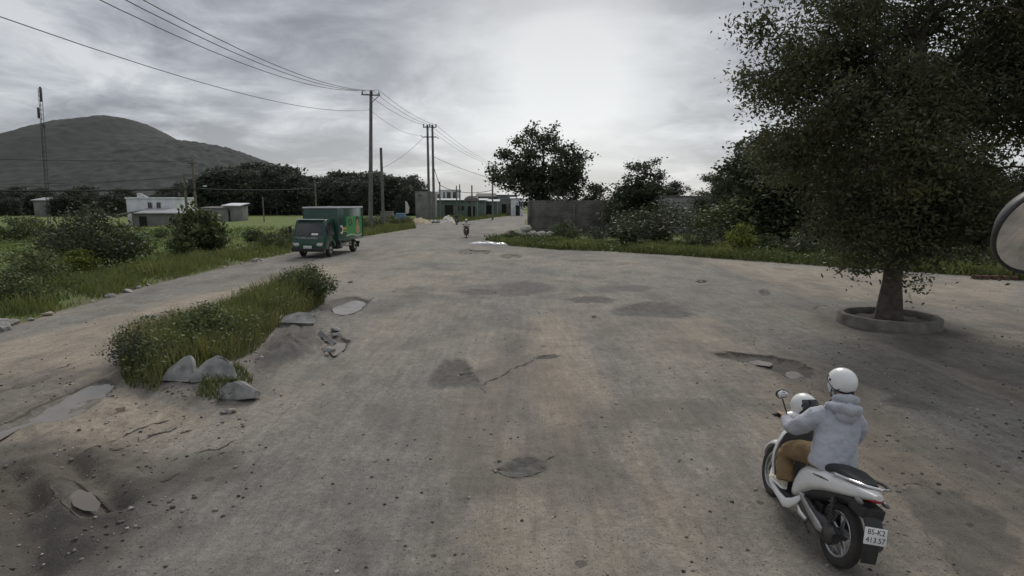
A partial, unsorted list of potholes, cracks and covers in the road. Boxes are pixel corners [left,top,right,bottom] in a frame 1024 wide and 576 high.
pothole [321,334,351,359]
crack [83,420,177,452]
pothole [328,297,369,316]
pothole [49,477,111,520]
pothole [713,351,816,379]
pothole [0,378,119,442]
